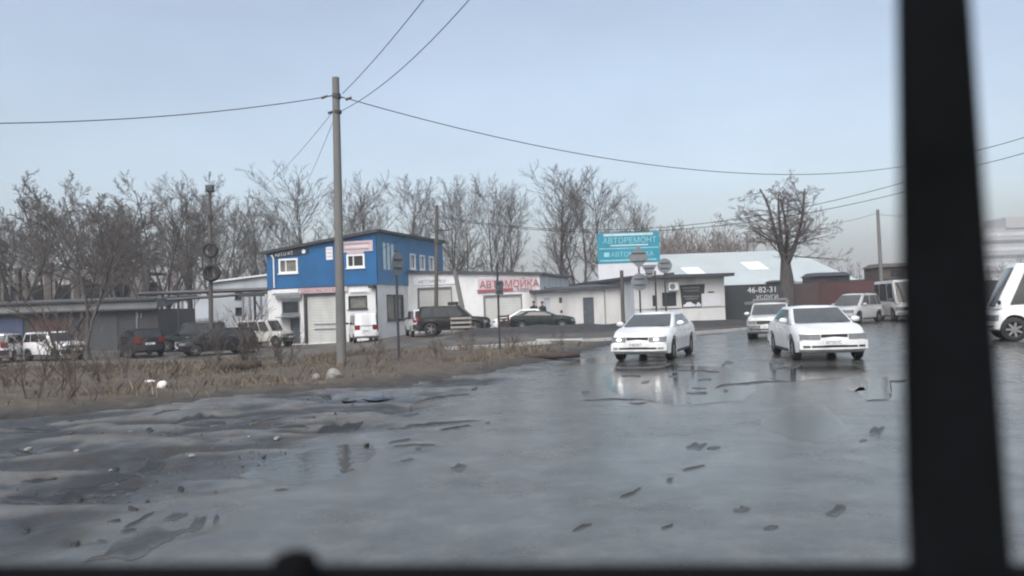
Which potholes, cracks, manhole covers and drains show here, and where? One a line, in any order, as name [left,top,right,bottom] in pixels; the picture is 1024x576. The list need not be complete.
pothole [84,526,187,562]
pothole [686,442,707,450]
pothole [315,421,364,434]
pothole [869,425,885,438]
pothole [135,458,165,478]
pothole [163,511,189,520]
pothole [186,515,206,532]
pothole [826,503,846,516]
